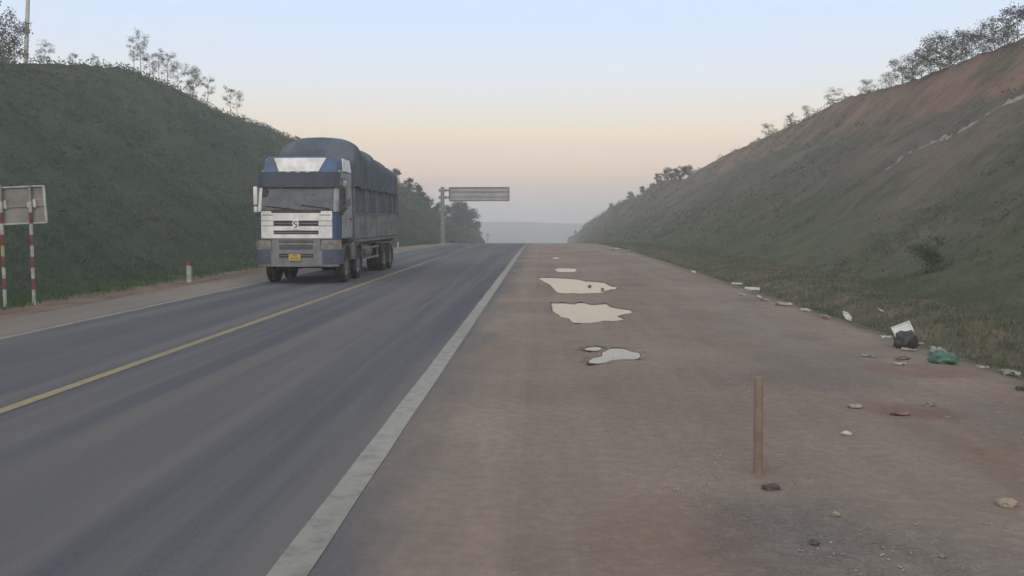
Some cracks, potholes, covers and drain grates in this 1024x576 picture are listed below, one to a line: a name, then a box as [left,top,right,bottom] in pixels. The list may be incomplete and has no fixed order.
pothole [535,277,621,294]
pothole [546,302,638,324]
pothole [584,347,647,365]
